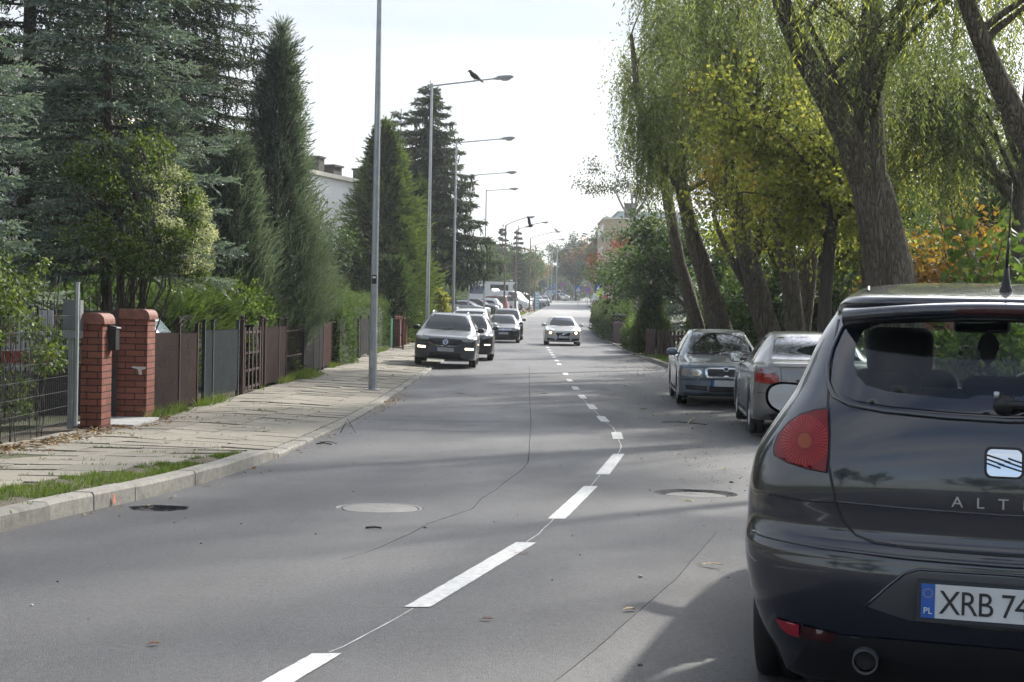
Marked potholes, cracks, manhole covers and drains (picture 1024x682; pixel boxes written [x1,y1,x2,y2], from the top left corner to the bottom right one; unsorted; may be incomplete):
manhole cover [336,503,424,513]
crack [348,365,597,558]
manhole cover [654,489,738,497]
